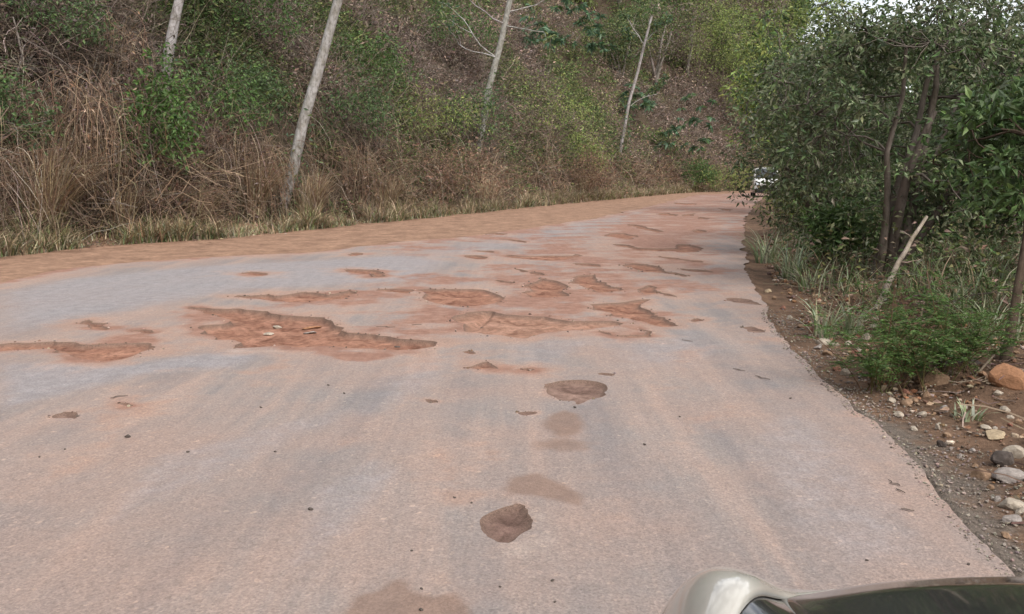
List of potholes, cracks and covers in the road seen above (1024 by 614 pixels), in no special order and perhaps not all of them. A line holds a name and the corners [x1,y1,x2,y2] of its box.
pothole [590,299,678,327]
pothole [343,269,385,277]
pothole [623,263,687,277]
pothole [451,311,623,338]
pothole [0,341,155,361]
pothole [522,279,569,298]
pothole [613,244,704,253]
pothole [419,289,505,306]
pothole [480,504,533,543]
pothole [234,290,356,302]
pothole [188,307,437,350]
pothole [544,380,608,405]
